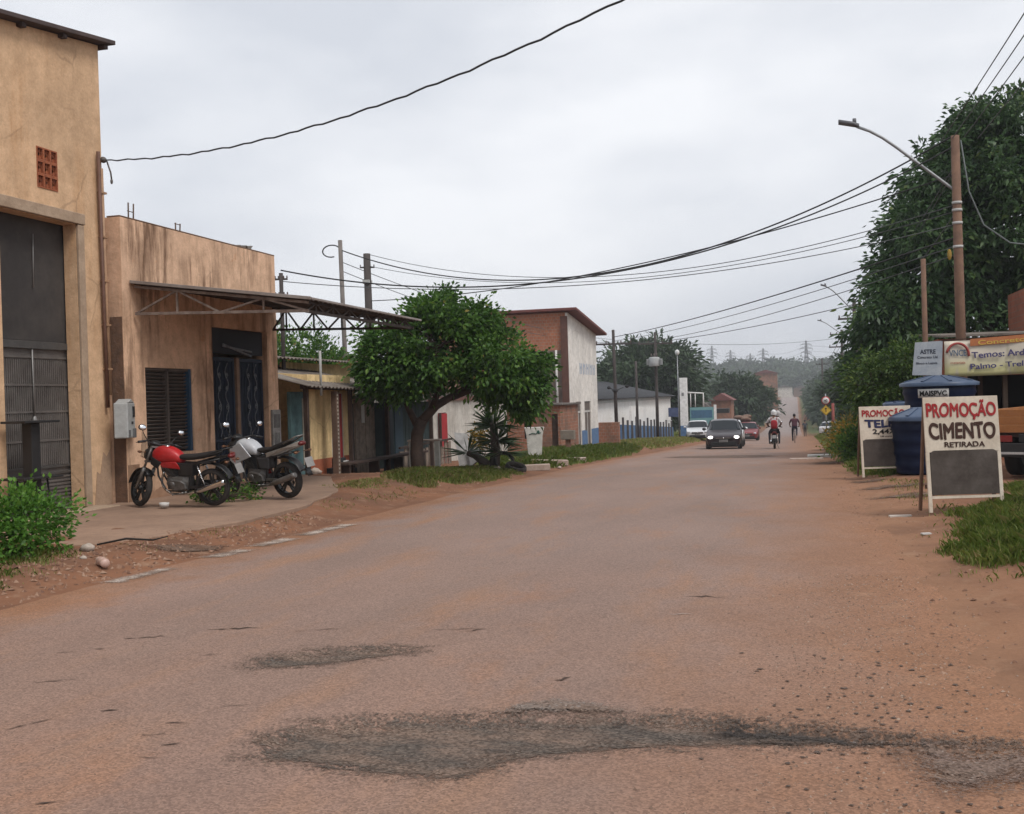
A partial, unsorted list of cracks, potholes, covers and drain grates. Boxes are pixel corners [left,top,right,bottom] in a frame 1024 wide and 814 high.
crack [139,722,187,758]
